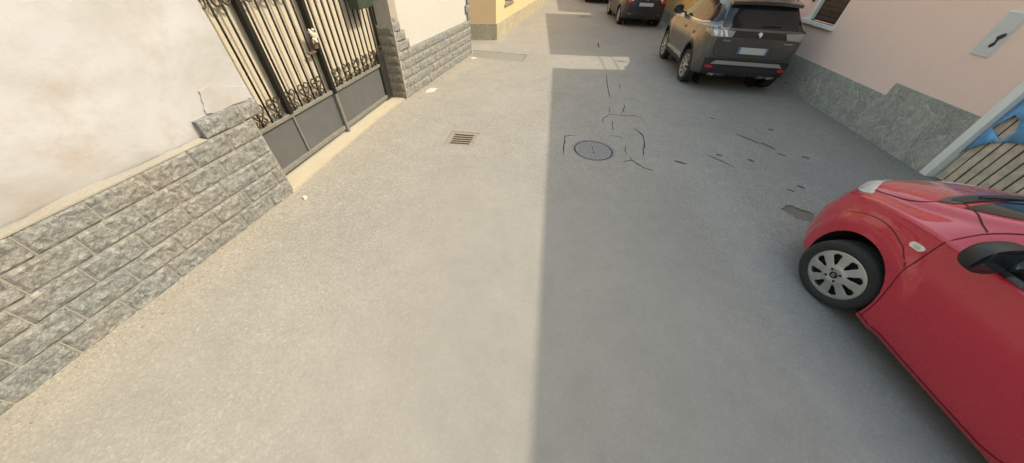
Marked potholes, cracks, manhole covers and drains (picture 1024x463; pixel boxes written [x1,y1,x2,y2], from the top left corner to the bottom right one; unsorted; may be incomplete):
manhole cover [572,140,615,161]
crack [602,75,653,171]
drain grate [445,131,480,146]
